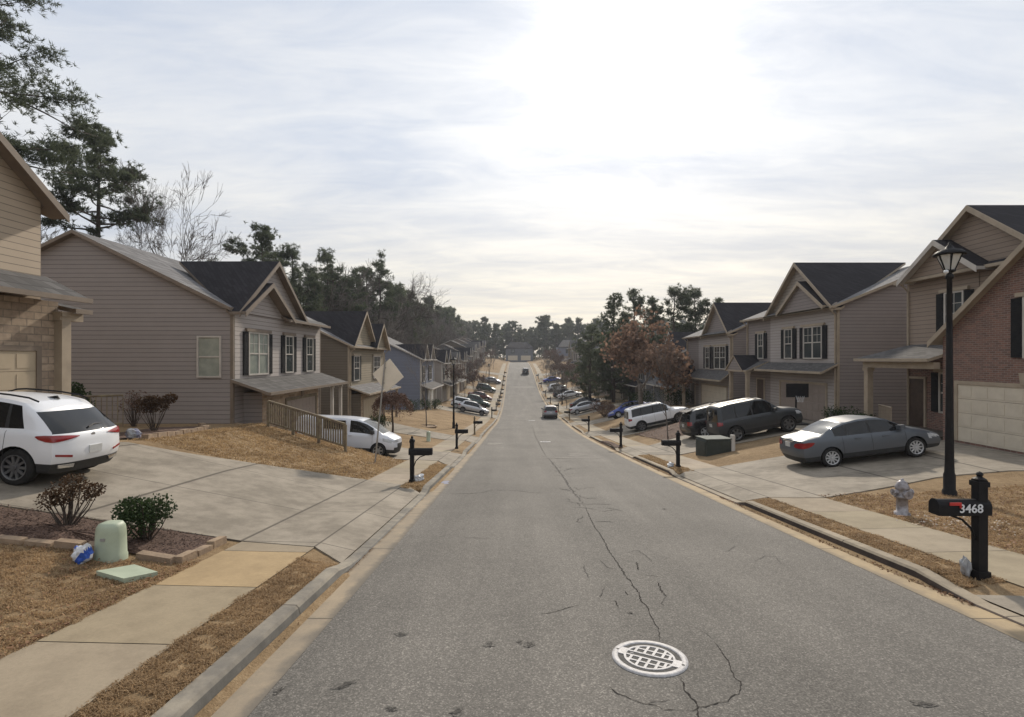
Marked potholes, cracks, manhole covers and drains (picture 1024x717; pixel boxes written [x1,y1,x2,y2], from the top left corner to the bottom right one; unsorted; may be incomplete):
crack [532,426,666,639]
manhole cover [612,640,689,677]
crack [610,625,742,717]
